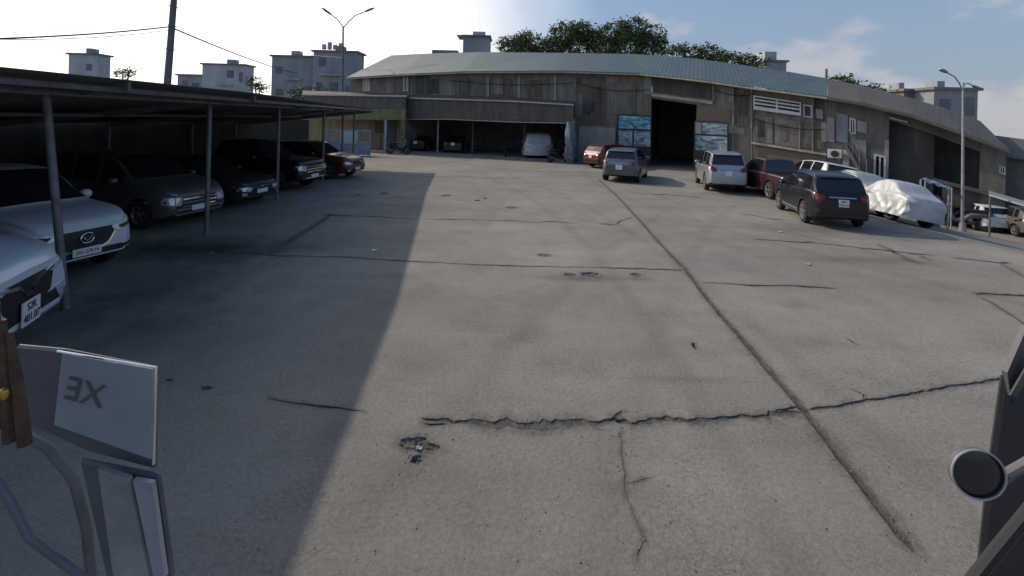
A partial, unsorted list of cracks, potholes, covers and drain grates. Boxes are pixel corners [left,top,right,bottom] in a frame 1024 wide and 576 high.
crack [270,398,359,411]
crack [422,378,1000,562]
pothole [399,437,441,453]
